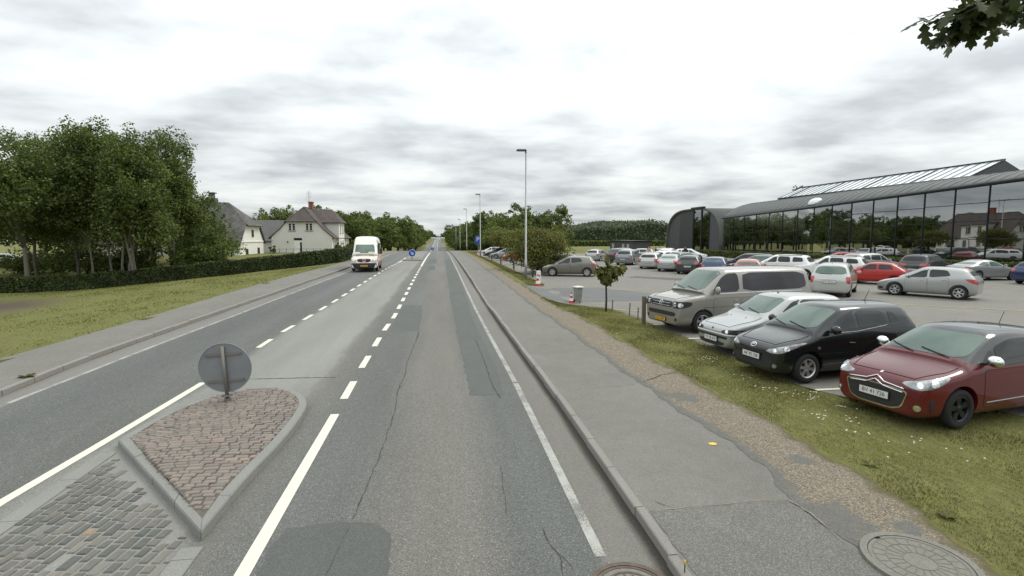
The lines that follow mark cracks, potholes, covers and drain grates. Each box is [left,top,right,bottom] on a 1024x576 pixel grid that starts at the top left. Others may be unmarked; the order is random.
manhole cover [592,562,664,576]
crack [655,499,845,543]
crack [352,332,419,519]
manhole cover [859,531,986,576]
